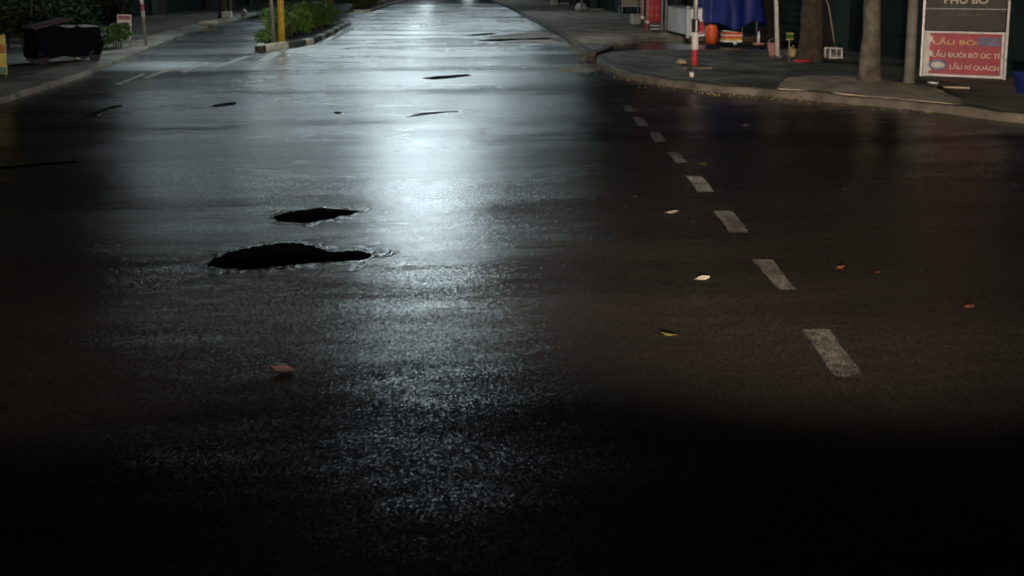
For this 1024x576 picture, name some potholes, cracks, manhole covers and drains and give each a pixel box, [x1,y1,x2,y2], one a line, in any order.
pothole [194,240,400,275]
crack [0,161,78,169]
pothole [268,206,371,227]
pothole [82,105,123,117]
